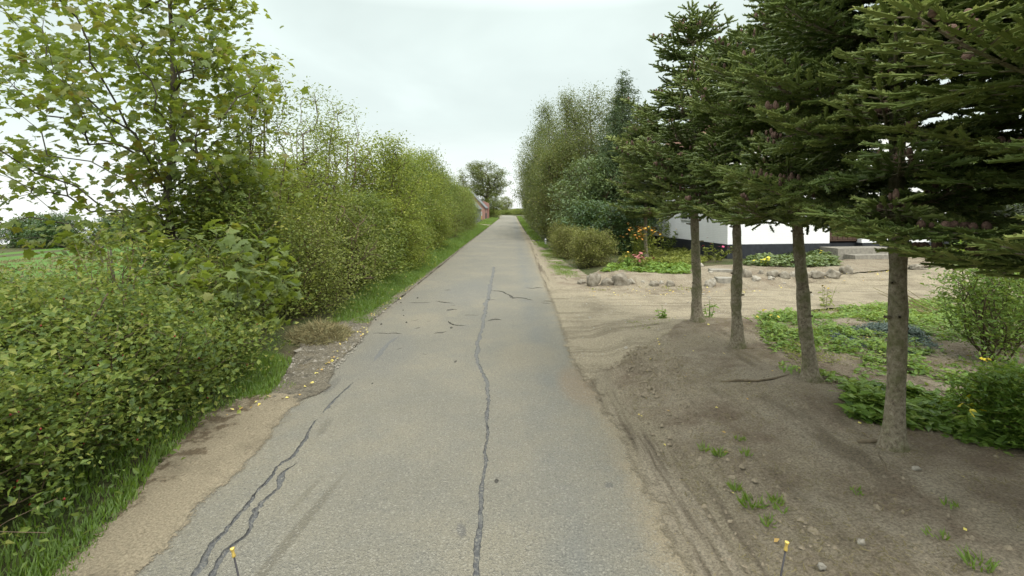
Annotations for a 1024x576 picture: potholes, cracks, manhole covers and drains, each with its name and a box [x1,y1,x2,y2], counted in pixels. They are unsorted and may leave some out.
crack [409,301,464,333]
crack [190,382,354,576]
